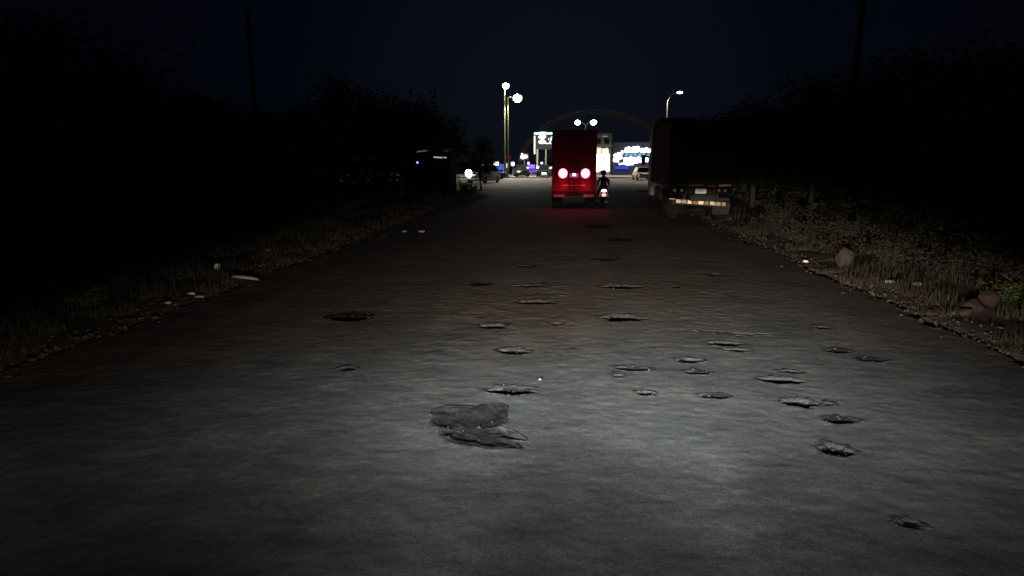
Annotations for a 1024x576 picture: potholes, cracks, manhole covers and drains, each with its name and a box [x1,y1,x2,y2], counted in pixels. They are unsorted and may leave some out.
pothole [480,384,542,397]
pothole [493,346,534,356]
pothole [671,356,709,365]
pothole [322,311,376,322]
pothole [819,414,865,427]
pothole [753,375,813,386]
pothole [429,403,531,452]
pothole [694,392,734,400]
pothole [775,396,826,410]
pothole [594,313,651,323]
pothole [702,340,748,348]
pothole [810,439,862,460]
